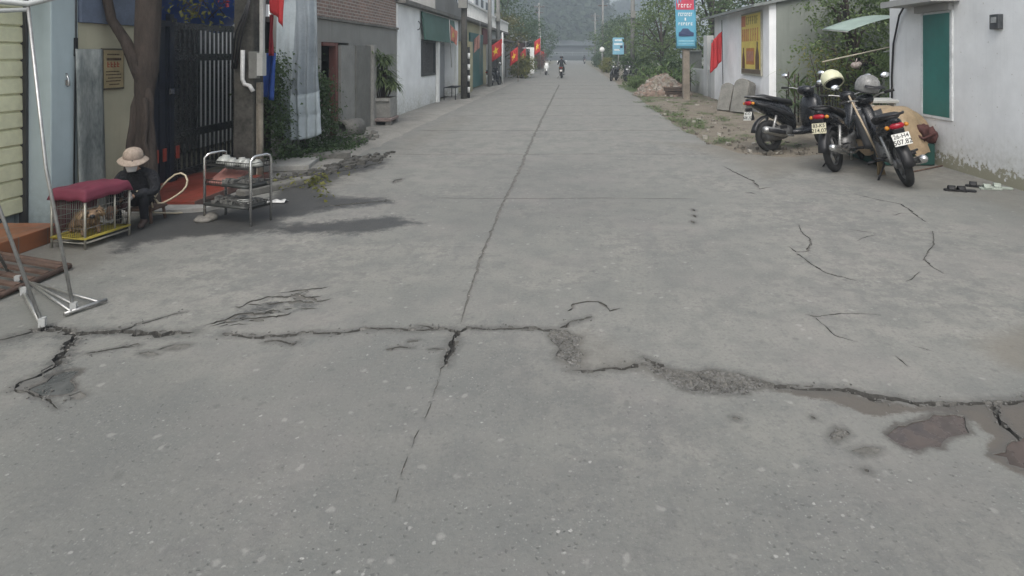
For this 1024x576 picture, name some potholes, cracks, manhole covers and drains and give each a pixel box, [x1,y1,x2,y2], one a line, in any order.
pothole [827,428,850,443]
pothole [634,362,765,395]
pothole [547,329,584,367]
crack [1,309,193,409]
pothole [29,370,80,396]
crack [207,85,1024,502]
